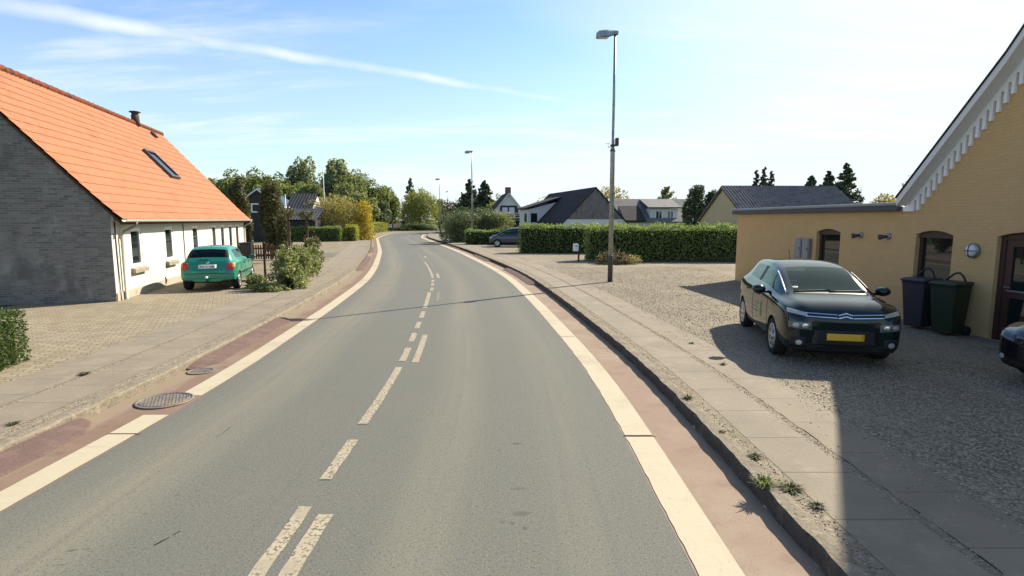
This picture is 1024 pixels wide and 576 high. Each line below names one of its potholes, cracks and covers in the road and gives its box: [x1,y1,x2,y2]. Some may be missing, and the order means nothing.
manhole cover [134,392,194,409]
